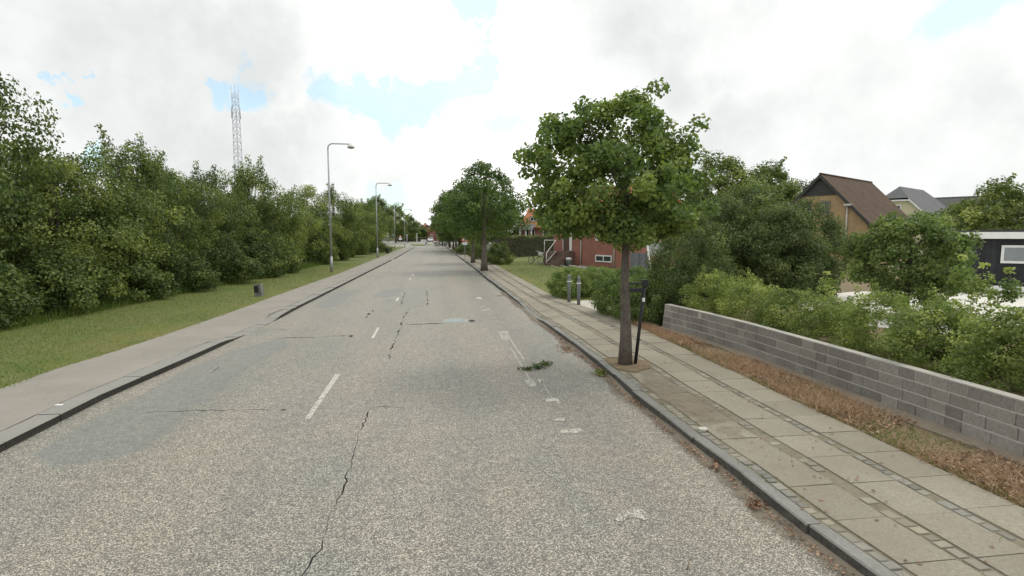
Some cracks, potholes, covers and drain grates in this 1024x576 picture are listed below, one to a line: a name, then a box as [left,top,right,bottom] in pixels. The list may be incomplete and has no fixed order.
crack [301,406,402,576]
crack [388,293,442,359]
